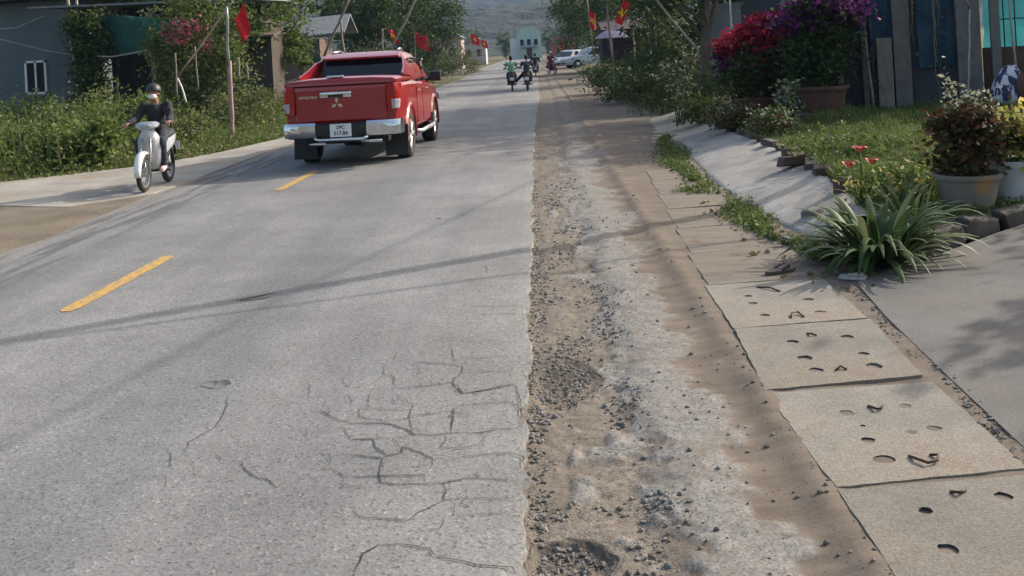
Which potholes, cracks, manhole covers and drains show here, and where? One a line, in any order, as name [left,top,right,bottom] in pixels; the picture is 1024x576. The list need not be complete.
pothole [529,357,605,416]
crack [217,455,291,488]
crack [305,283,525,574]
pothole [524,537,623,576]
crack [162,396,228,487]
pothole [201,380,232,389]
